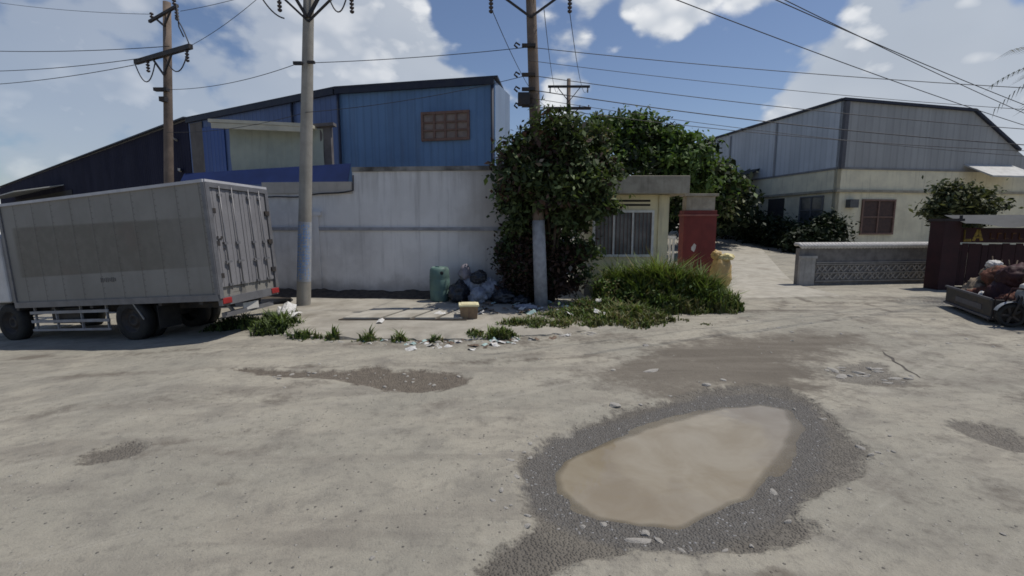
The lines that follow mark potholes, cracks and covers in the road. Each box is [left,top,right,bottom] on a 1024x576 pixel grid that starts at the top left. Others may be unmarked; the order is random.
pothole [478,384,870,576]
pothole [828,361,916,387]
pothole [79,441,147,466]
pothole [945,421,1024,453]
pothole [235,366,470,393]
crack [883,352,919,377]
